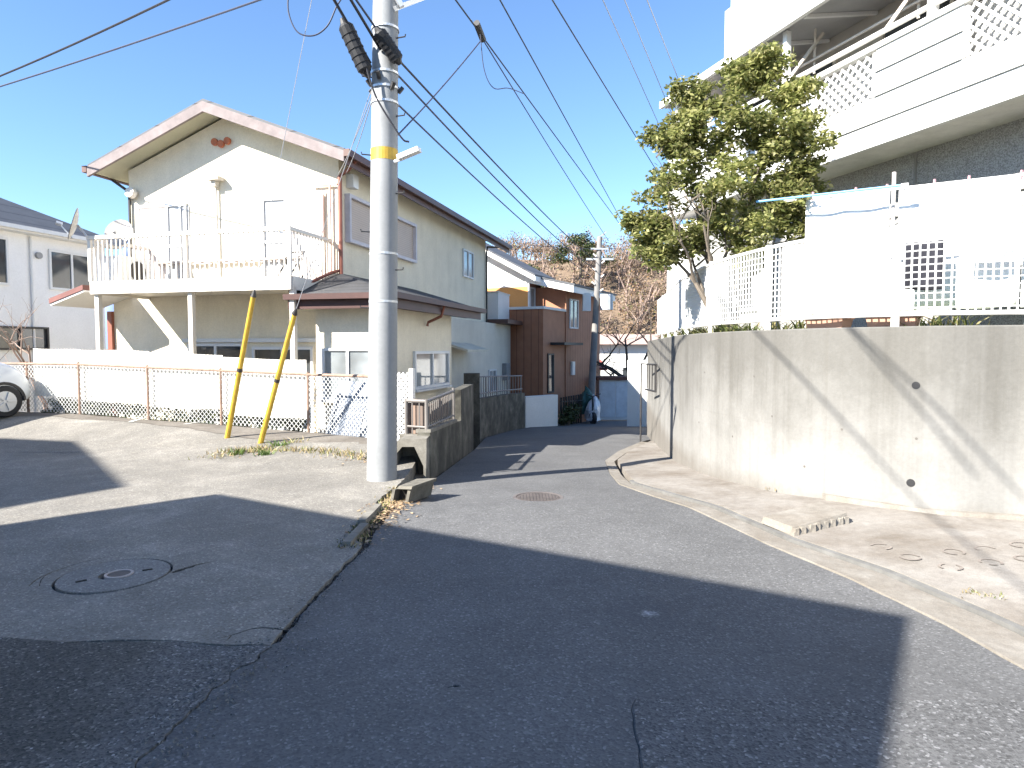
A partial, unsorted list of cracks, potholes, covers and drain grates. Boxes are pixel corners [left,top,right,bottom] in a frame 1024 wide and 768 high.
manhole cover [52,559,173,595]
manhole cover [513,492,563,501]
crack [631,706,641,768]
